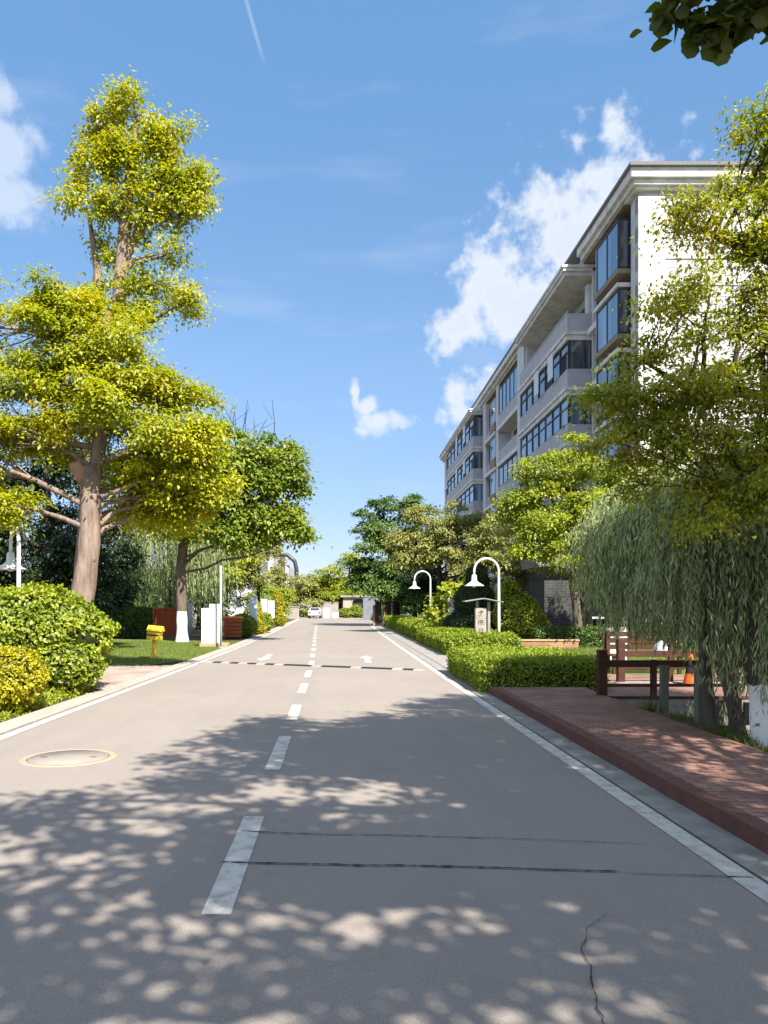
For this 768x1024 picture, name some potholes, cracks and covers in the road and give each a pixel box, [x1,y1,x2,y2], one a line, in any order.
manhole cover [18,749,117,767]
crack [581,913,606,1024]
